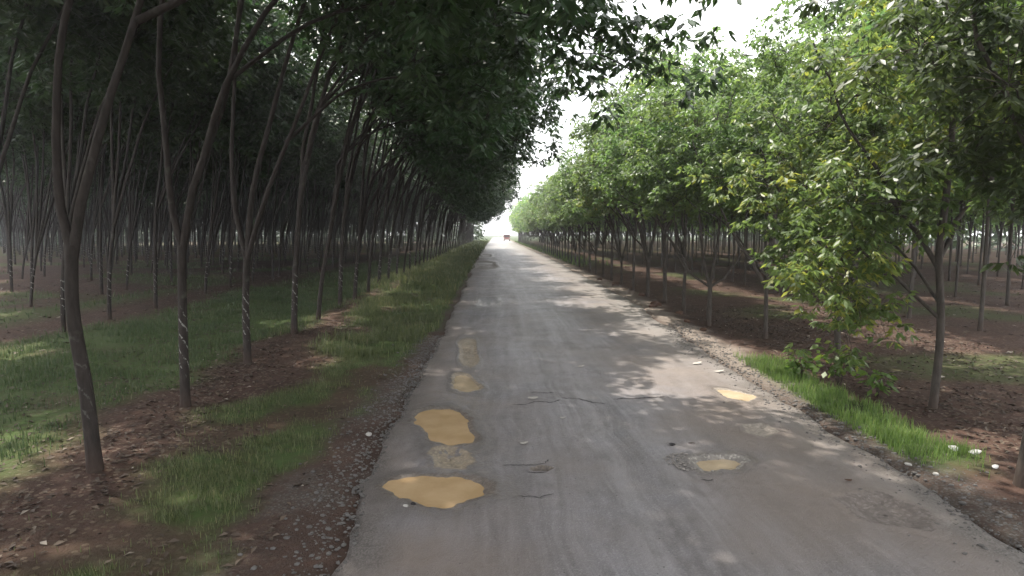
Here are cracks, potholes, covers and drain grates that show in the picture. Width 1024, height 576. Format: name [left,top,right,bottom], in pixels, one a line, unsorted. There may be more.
pothole [708,386,765,404]
pothole [678,451,761,474]
crack [515,392,665,405]
pothole [454,334,484,374]
pothole [446,369,490,397]
pothole [357,468,520,518]
pothole [399,401,494,459]
pothole [420,444,484,475]
